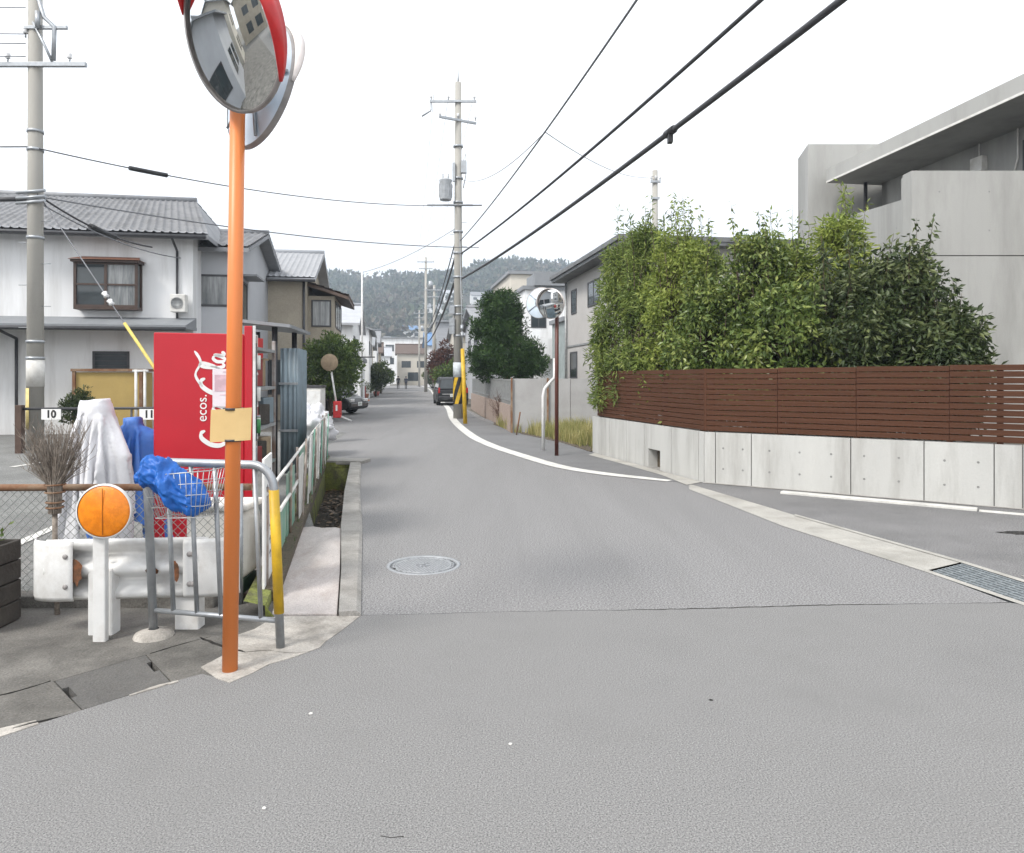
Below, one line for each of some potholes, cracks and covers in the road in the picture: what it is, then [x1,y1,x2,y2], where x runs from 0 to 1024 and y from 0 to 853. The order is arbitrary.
drain grate [933,564,1024,604]
manhole cover [386,555,461,575]
